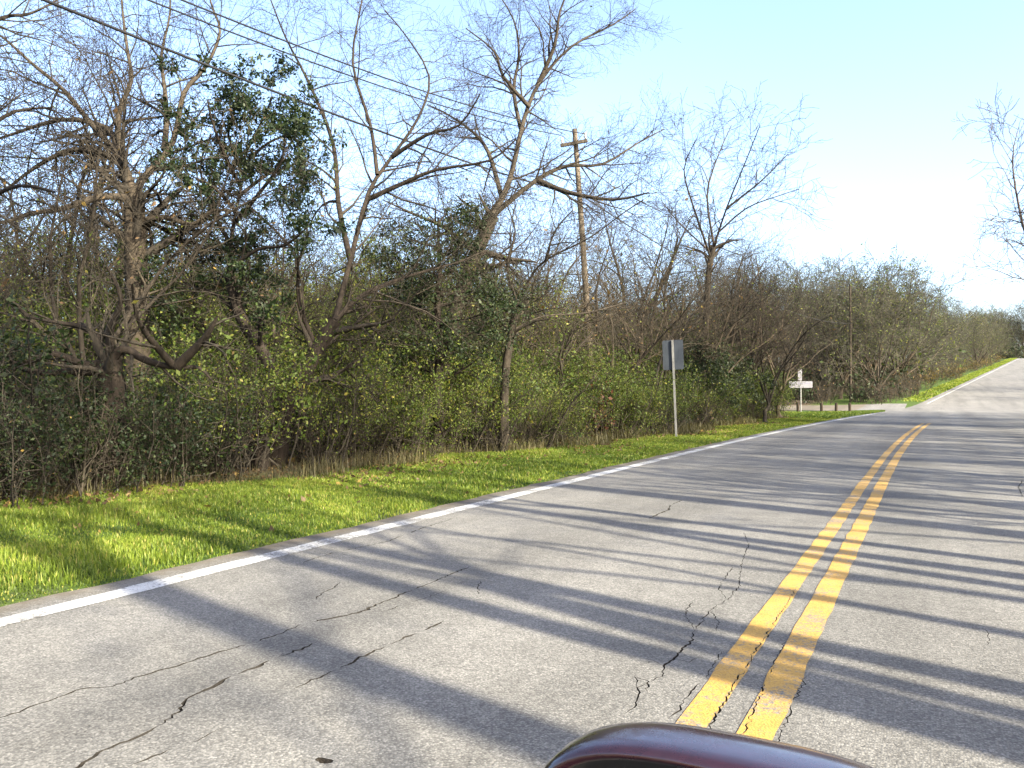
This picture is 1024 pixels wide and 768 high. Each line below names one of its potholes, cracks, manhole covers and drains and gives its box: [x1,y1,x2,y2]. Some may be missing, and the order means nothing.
crack [0,568,481,768]
crack [624,532,794,733]
